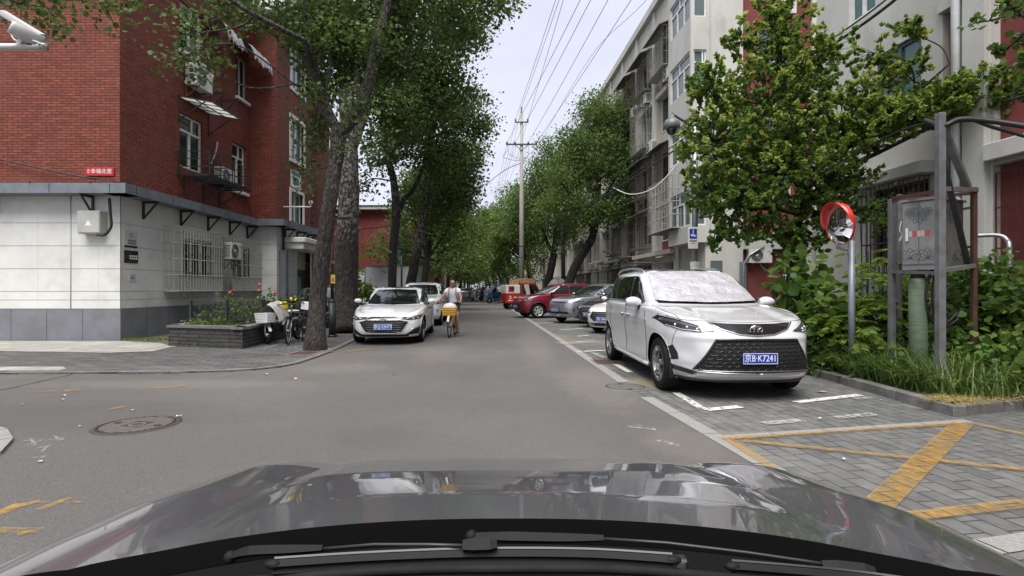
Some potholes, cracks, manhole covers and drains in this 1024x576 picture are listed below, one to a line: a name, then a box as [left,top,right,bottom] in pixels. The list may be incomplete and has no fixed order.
manhole cover [602,383,649,392]
manhole cover [88,416,183,436]
